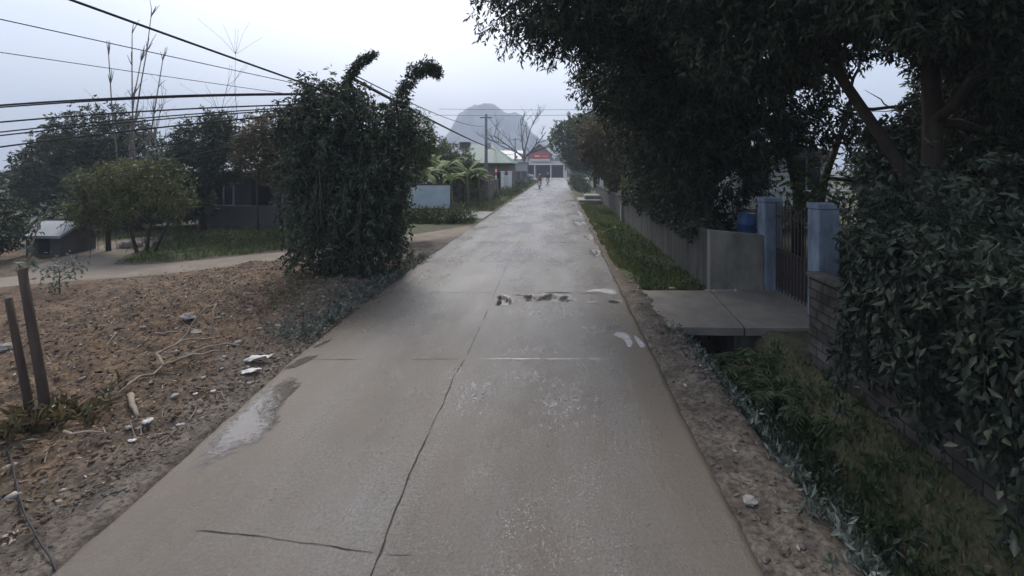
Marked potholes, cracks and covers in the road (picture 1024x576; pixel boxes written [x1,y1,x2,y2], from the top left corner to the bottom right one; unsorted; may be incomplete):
pothole [497,295,511,308]
pothole [524,294,575,302]
